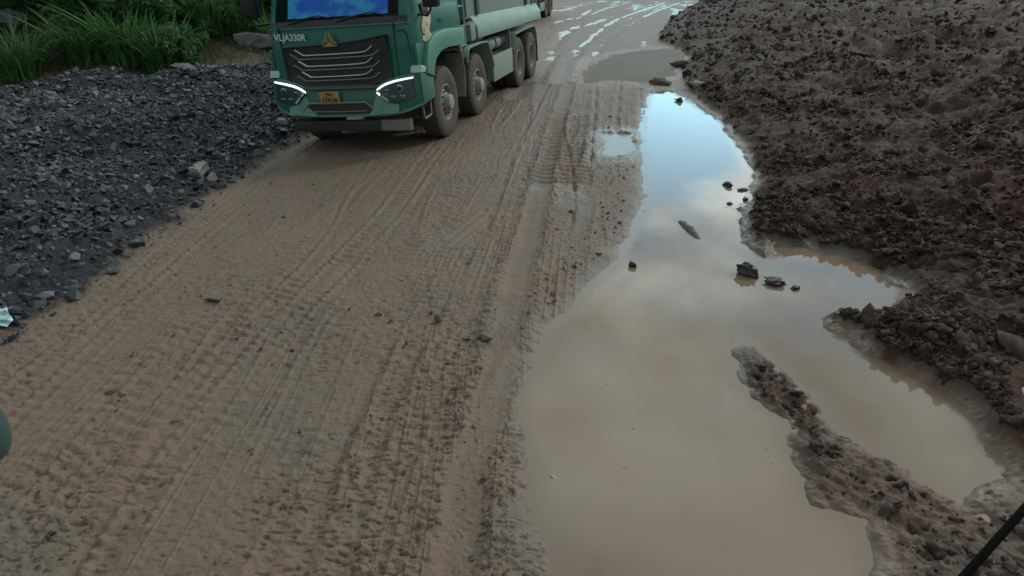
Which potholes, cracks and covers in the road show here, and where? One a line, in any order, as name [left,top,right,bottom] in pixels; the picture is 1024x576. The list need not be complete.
pothole [514,87,1024,576]
